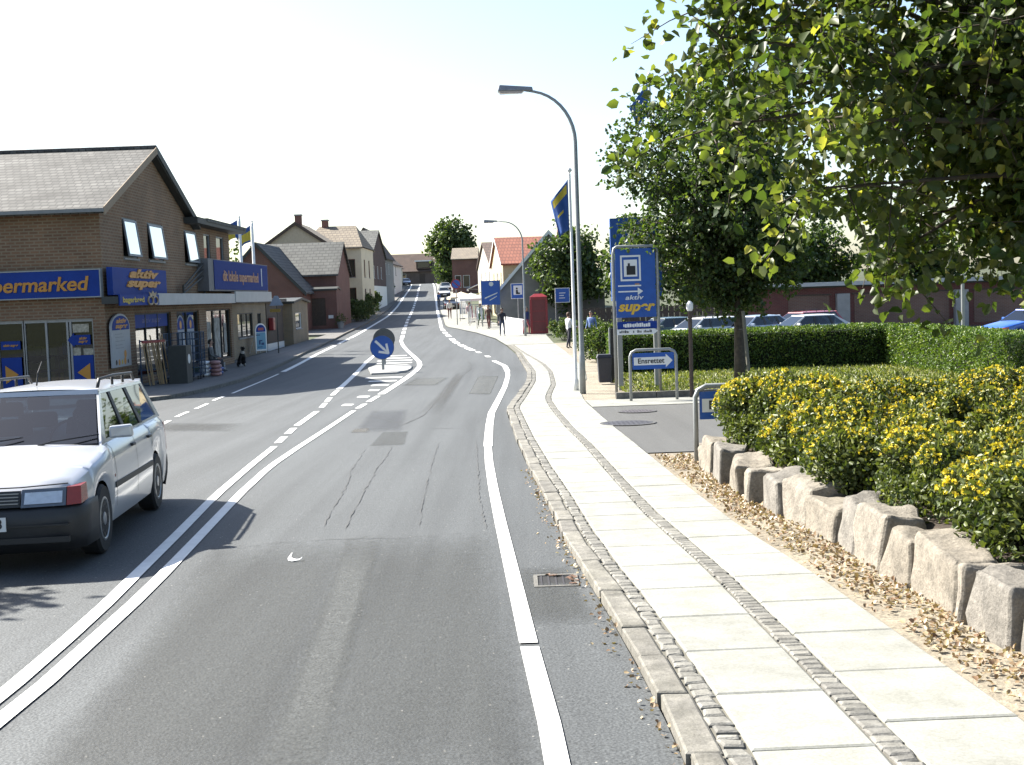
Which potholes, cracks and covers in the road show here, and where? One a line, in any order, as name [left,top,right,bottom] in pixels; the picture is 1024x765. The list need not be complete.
crack [467,428,487,527]
drain grate [533,573,580,587]
crack [324,447,422,528]
